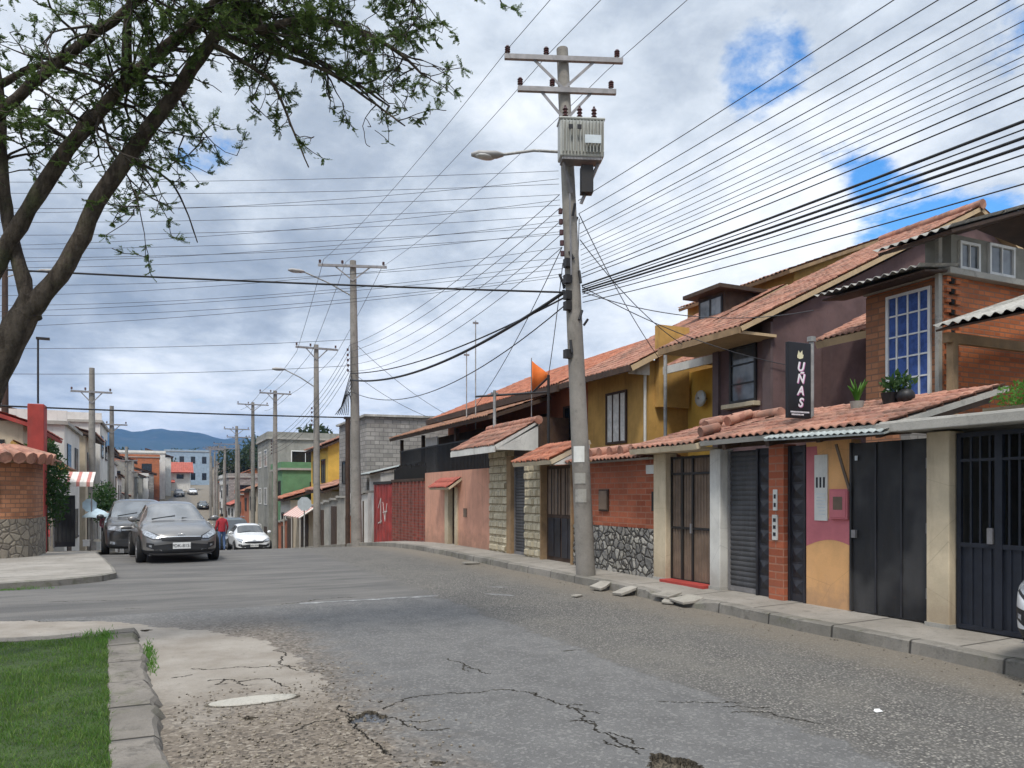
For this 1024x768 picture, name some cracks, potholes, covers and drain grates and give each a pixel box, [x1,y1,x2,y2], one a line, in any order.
pothole [348,710,388,727]
manhole cover [204,694,300,707]
pothole [647,753,705,768]
crack [658,701,824,725]
crack [382,658,645,755]
crack [173,650,297,687]
